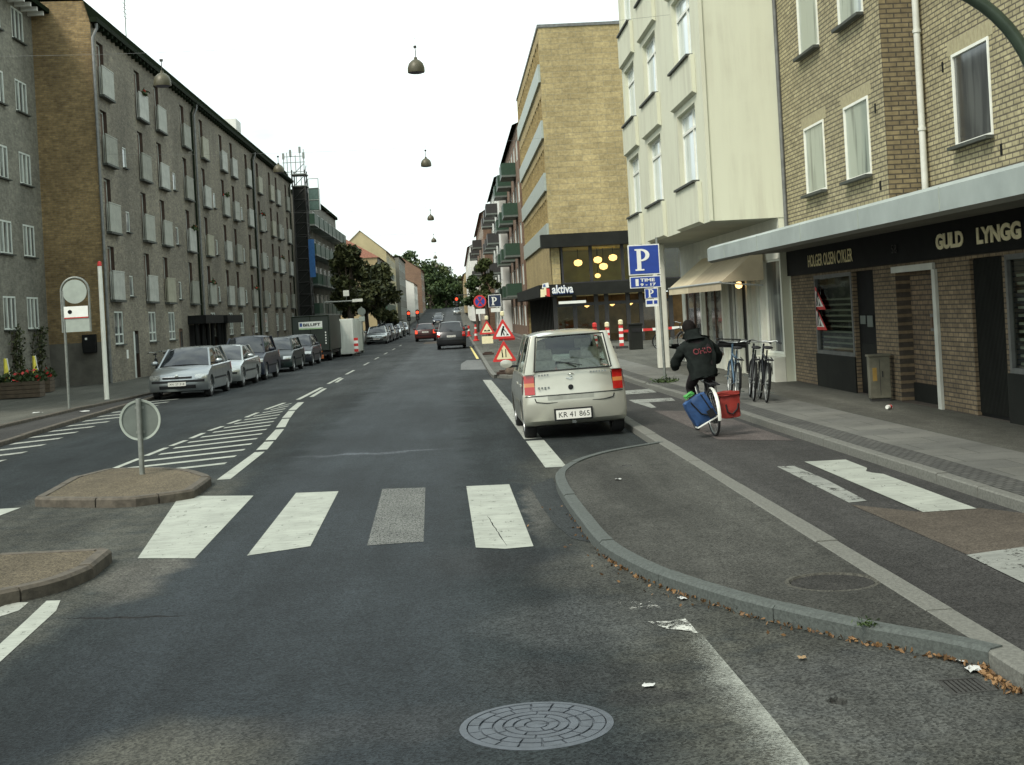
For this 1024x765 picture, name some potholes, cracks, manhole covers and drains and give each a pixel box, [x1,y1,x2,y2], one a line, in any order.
manhole cover [785,572,880,592]
manhole cover [459,701,614,751]
drain grate [934,677,995,695]
